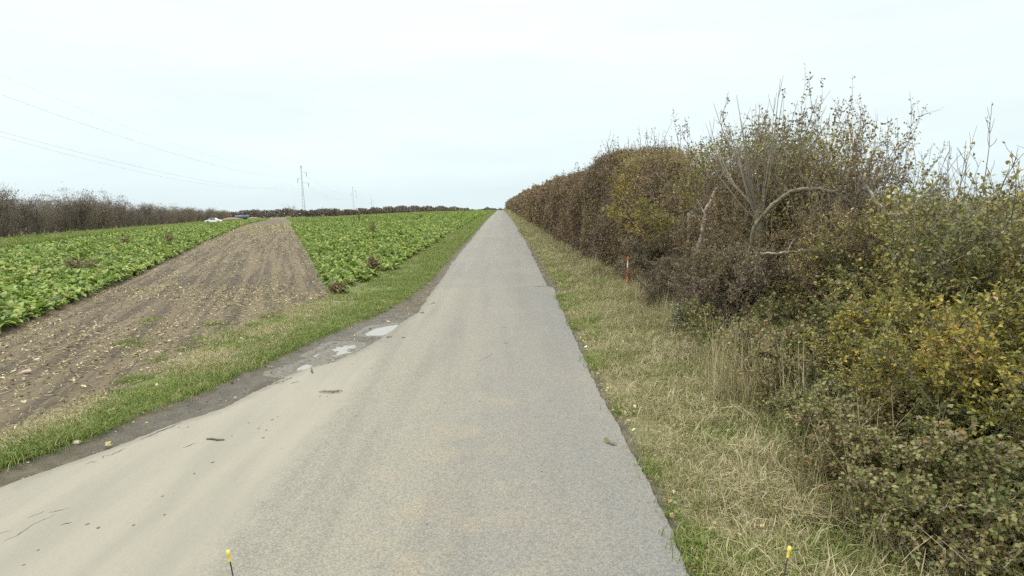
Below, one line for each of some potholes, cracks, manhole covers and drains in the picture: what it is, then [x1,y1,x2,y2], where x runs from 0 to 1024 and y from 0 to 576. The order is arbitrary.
pothole [300,341,368,360]
pothole [354,322,402,337]
